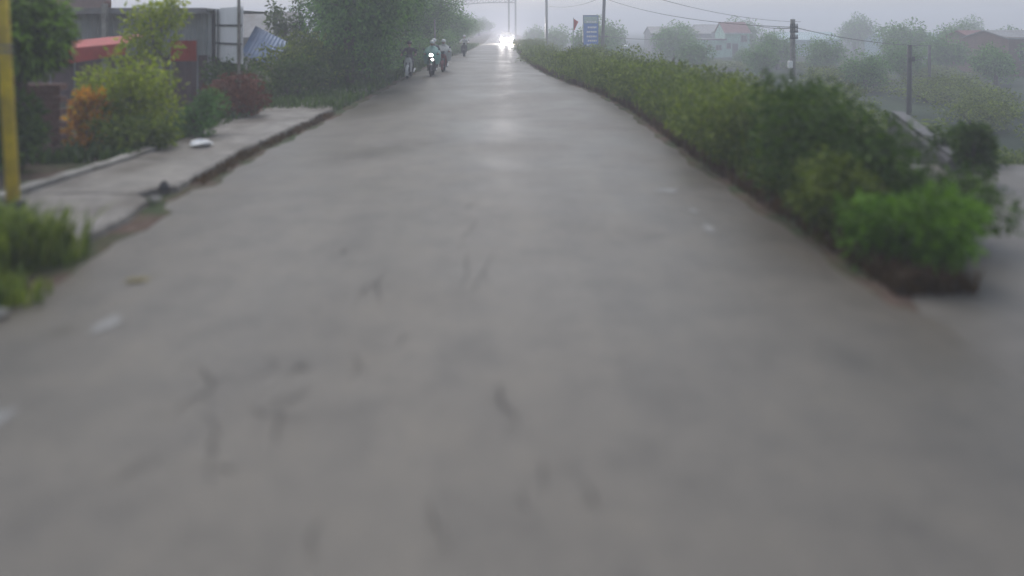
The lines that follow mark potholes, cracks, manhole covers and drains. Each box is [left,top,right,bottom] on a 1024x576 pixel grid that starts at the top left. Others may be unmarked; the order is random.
crack [253,355,310,441]
crack [424,502,451,557]
crack [520,458,600,517]
crack [149,364,238,480]
crack [493,384,517,430]
